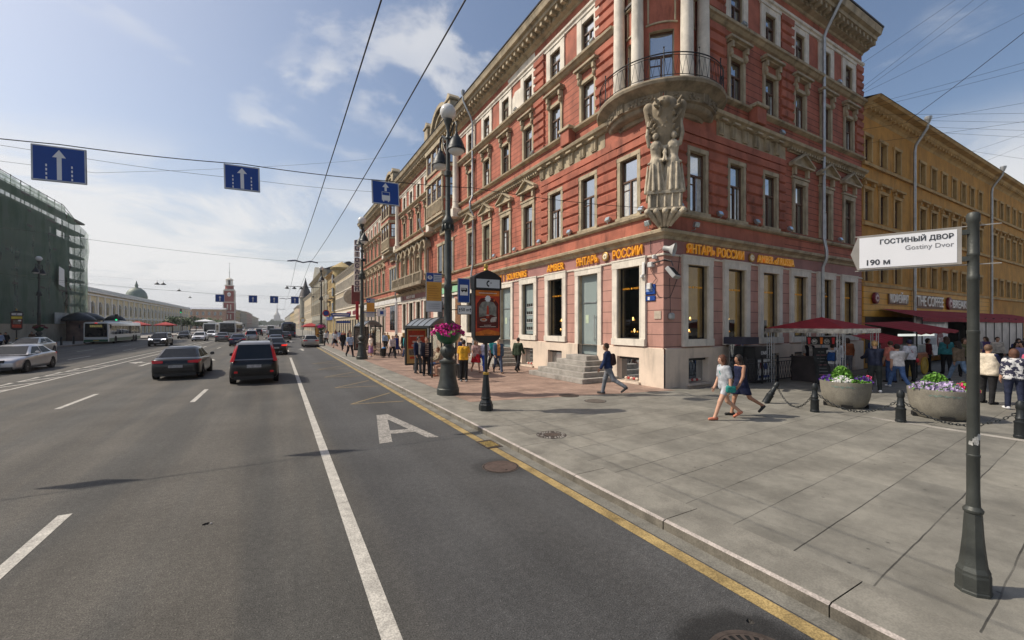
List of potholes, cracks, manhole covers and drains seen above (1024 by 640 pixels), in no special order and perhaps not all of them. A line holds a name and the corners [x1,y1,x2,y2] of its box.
manhole cover [710,630,775,640]
manhole cover [482,460,519,473]
